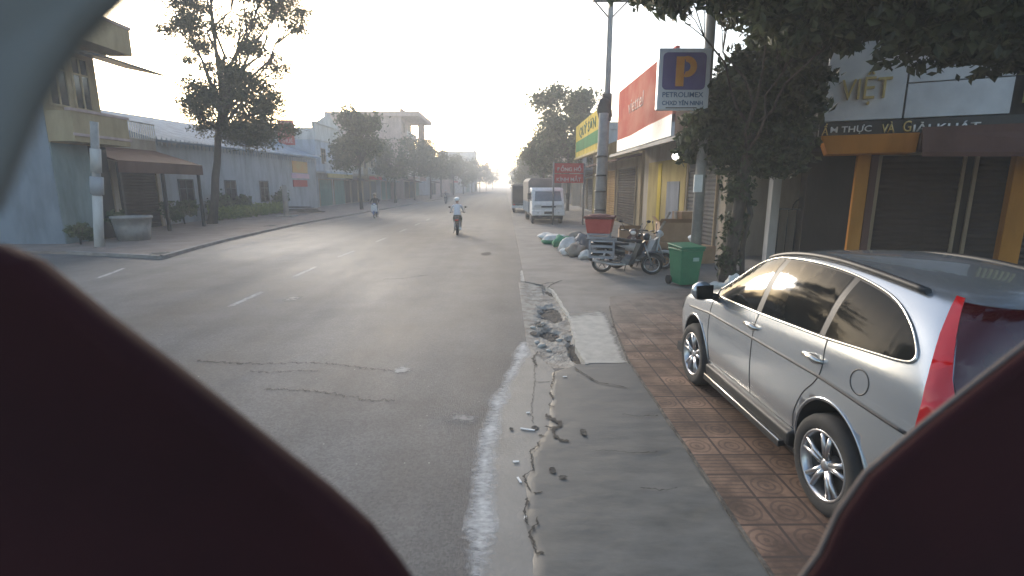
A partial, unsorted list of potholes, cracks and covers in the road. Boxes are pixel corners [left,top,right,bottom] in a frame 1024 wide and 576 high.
pothole [540,309,563,323]
crack [197,360,390,402]
pothole [567,341,581,364]
crack [528,516,544,554]
pothole [539,332,559,342]
crack [522,351,569,493]
